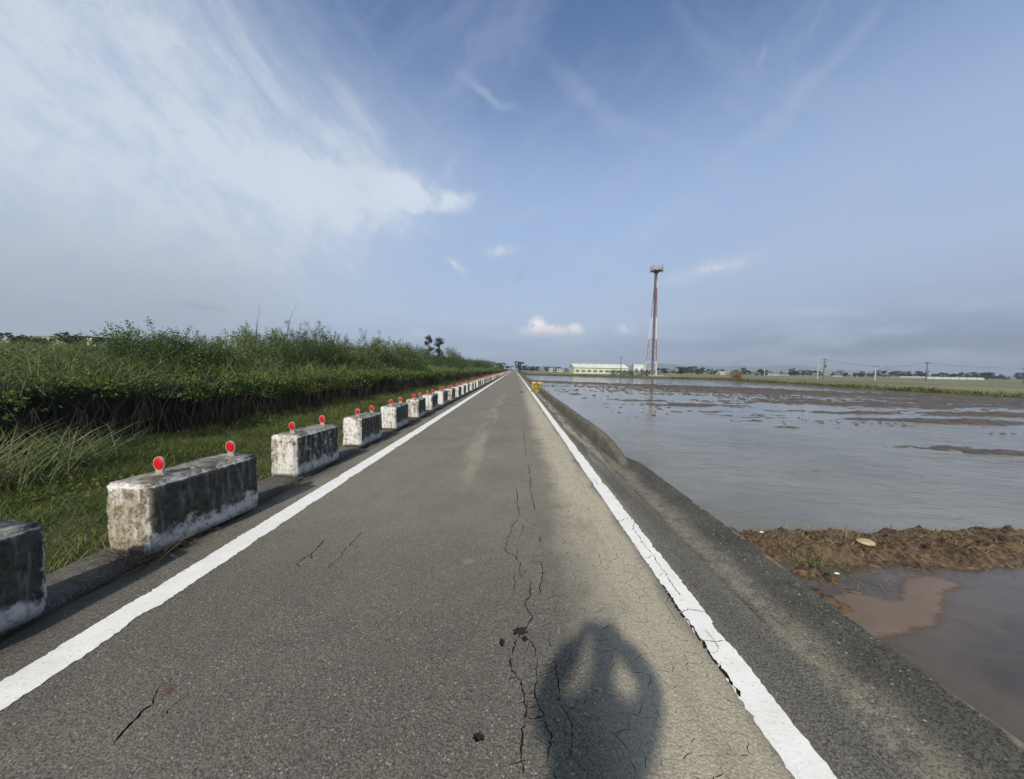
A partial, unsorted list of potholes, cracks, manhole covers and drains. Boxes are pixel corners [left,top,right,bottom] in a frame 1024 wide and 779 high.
crack [504,430,749,779]
crack [114,678,188,745]
crack [296,532,363,568]
